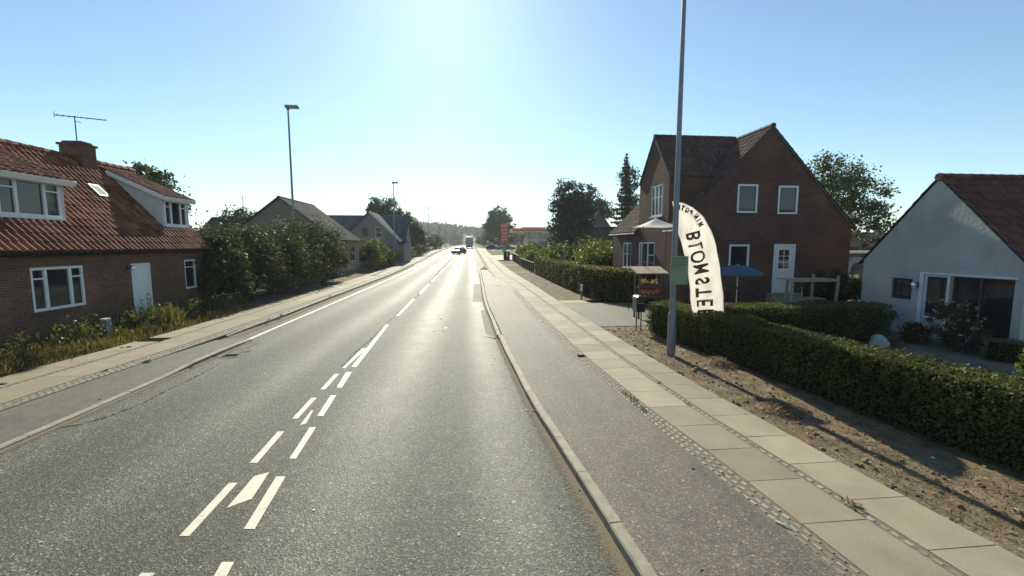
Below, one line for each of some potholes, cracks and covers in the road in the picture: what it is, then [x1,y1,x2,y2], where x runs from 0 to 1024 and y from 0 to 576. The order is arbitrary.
crack [60,367,214,428]
